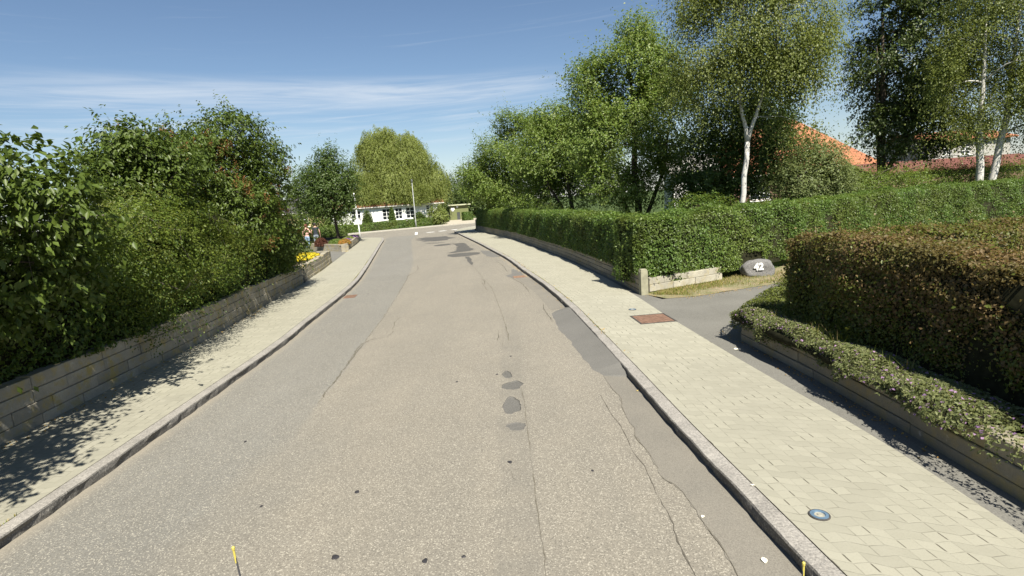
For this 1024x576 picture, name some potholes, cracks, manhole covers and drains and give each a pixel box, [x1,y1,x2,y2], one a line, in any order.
crack [472,262,551,346]
utility cover [808,509,831,521]
manhole cover [630,313,677,324]
crack [601,384,738,576]
crack [506,384,546,573]
